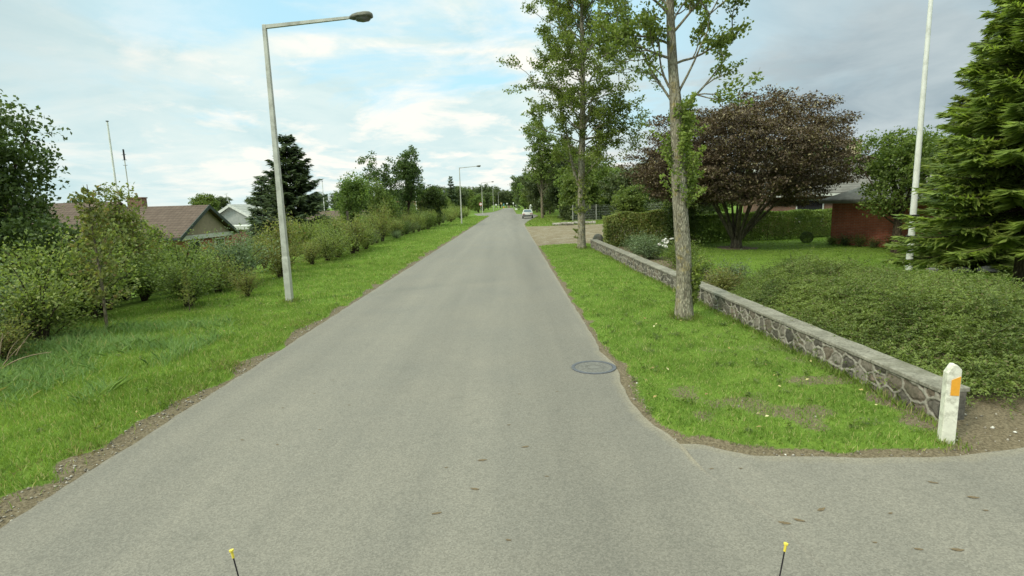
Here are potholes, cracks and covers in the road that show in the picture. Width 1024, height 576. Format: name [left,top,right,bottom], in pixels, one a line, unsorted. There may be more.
manhole cover [571,361,616,374]
